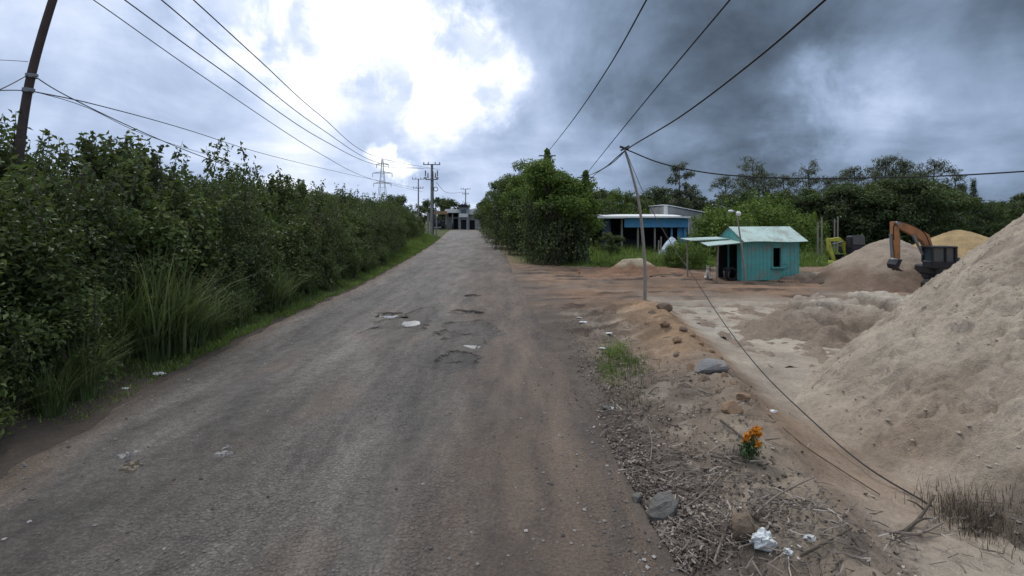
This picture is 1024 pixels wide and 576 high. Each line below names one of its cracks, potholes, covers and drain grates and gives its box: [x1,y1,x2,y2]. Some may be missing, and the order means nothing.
pothole [430,349,485,375]
pothole [429,319,512,352]
pothole [350,305,438,351]
